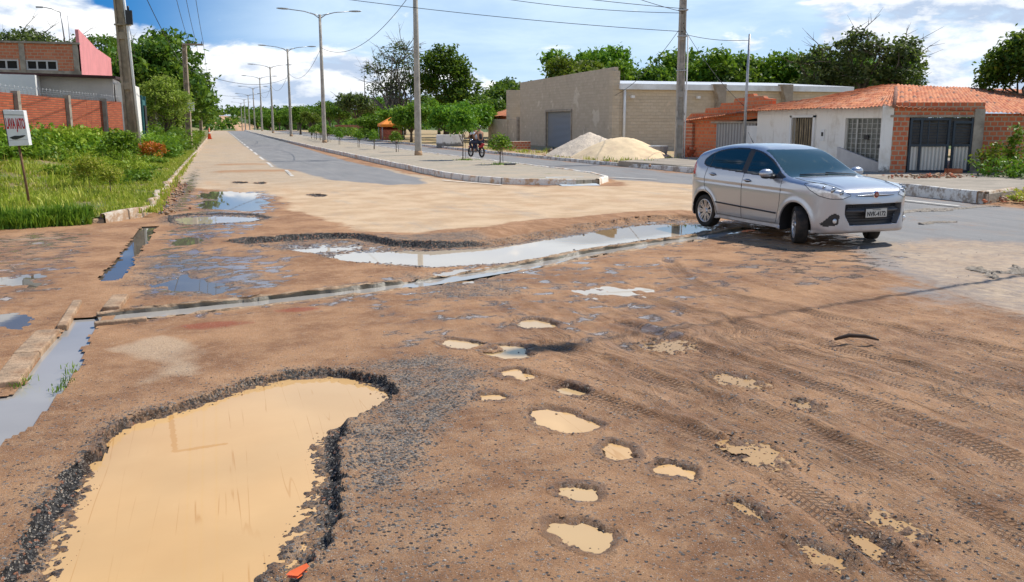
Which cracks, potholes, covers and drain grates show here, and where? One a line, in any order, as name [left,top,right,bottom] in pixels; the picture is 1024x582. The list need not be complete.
pothole [545,478,611,505]
crack [965,264,1024,279]
pothole [471,341,540,361]
pothole [588,436,649,464]
pothole [431,336,506,353]
pothole [518,401,613,436]
pothole [531,513,630,558]
pothole [160,212,277,226]
pothole [510,316,568,330]
pothole [548,379,596,398]
pothole [0,365,410,582]
pothole [219,213,727,269]
